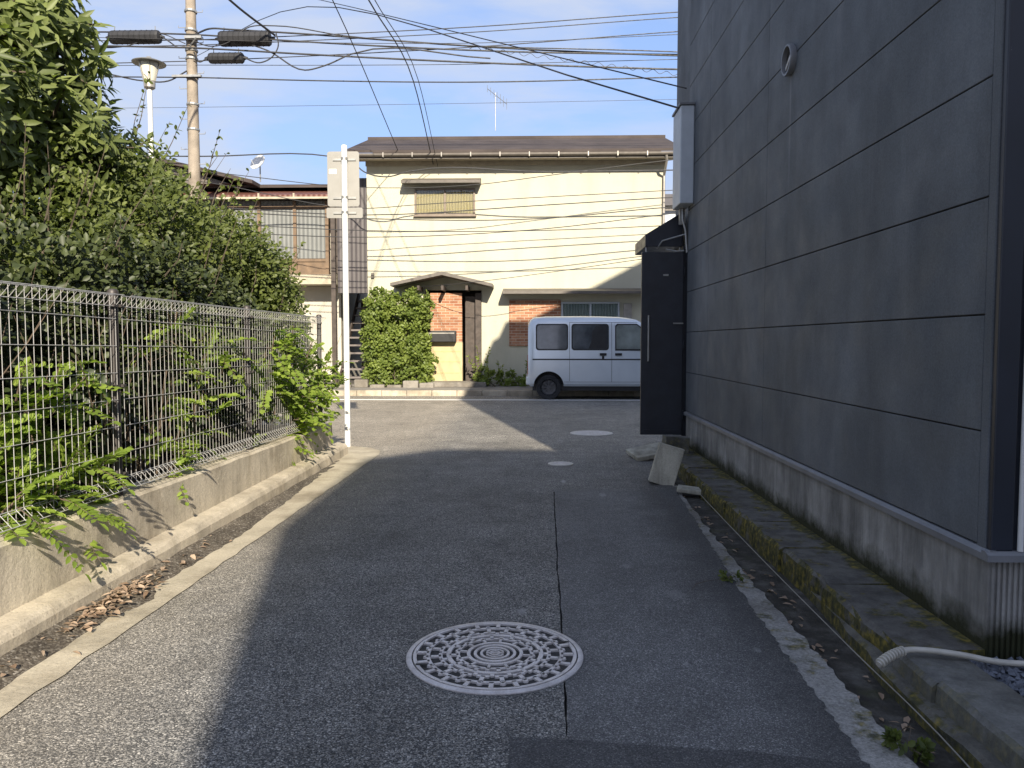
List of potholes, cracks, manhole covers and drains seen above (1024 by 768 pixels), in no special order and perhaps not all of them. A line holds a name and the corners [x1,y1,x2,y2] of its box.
manhole cover [406,621,583,695]
crack [553,492,568,736]
